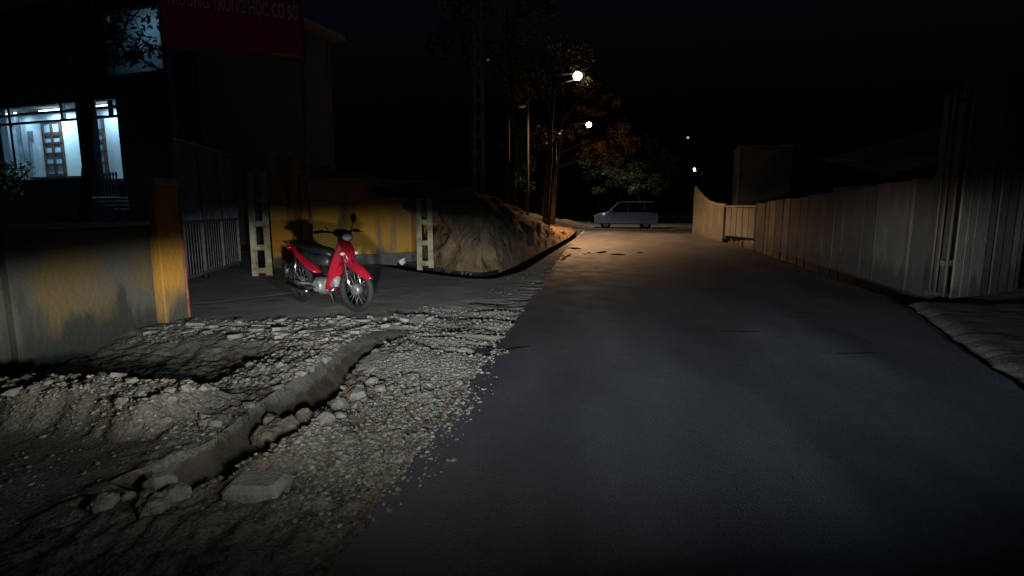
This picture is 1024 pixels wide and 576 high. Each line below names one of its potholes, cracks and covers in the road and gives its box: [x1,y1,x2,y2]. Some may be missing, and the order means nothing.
crack [474,345,536,355]
